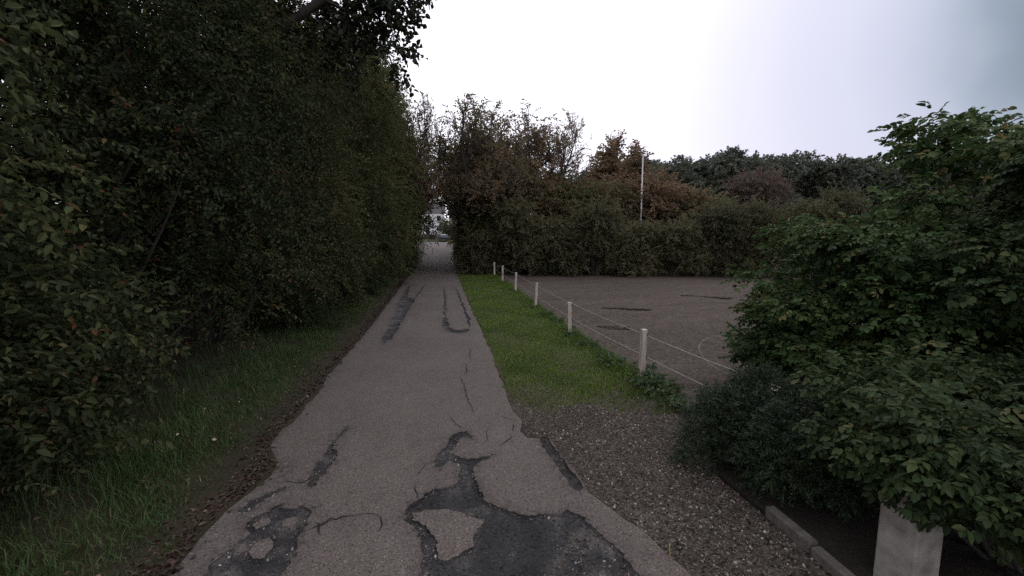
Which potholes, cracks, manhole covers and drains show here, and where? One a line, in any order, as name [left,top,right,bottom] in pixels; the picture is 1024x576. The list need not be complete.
crack [443,288,471,327]
crack [451,349,514,457]
pothole [208,503,312,576]
crack [309,505,383,535]
pothole [404,430,640,576]
